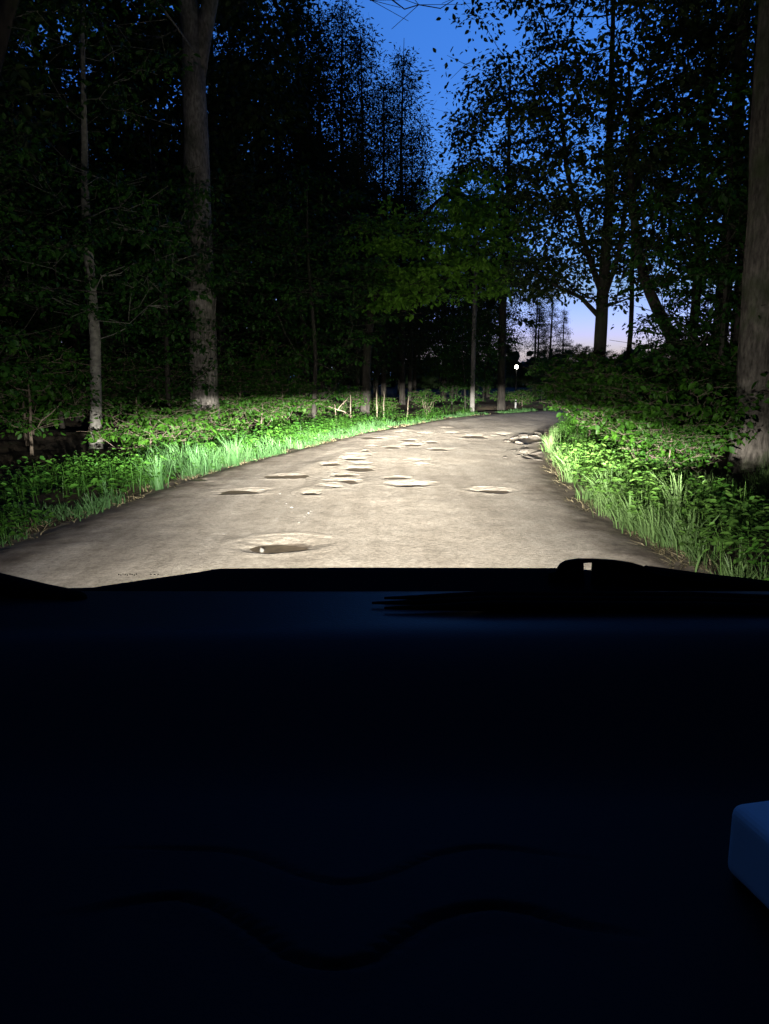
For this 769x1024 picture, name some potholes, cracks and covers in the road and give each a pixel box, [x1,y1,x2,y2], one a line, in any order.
pothole [199,486,283,497]
pothole [512,448,547,461]
pothole [290,486,333,498]
pothole [455,485,529,495]
pothole [503,434,548,446]
pothole [256,472,320,480]
pothole [212,531,350,558]
pothole [307,481,351,492]
pothole [338,460,379,468]
pothole [374,479,448,488]
